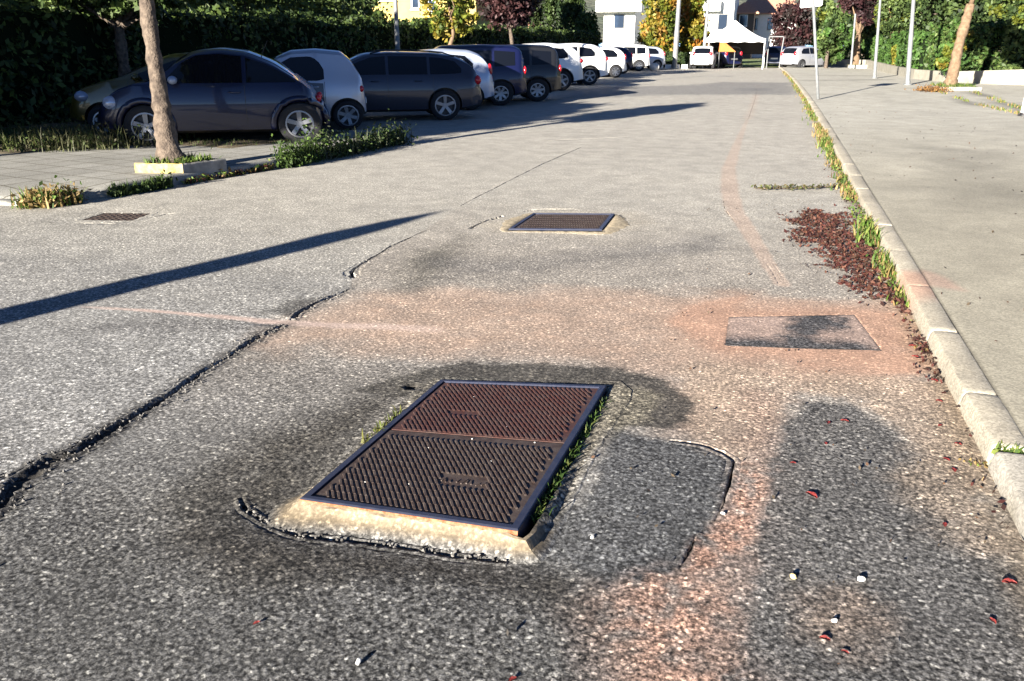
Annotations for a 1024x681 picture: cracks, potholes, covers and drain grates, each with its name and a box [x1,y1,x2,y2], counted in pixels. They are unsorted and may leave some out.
crack [0,229,508,567]
crack [456,136,625,229]
